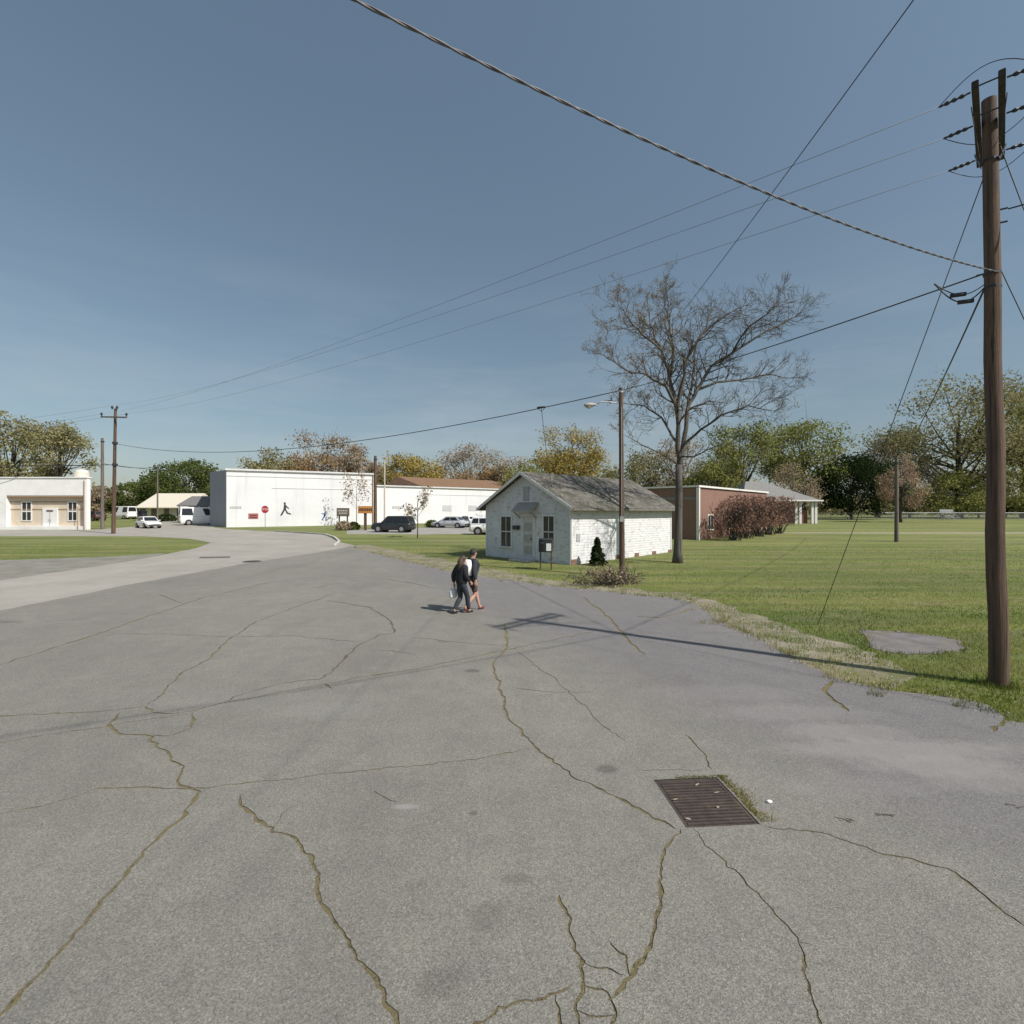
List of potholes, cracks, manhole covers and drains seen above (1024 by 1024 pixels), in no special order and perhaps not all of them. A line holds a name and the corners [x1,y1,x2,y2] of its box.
drain grate [655,778,758,828]
crack [0,581,1024,1024]
